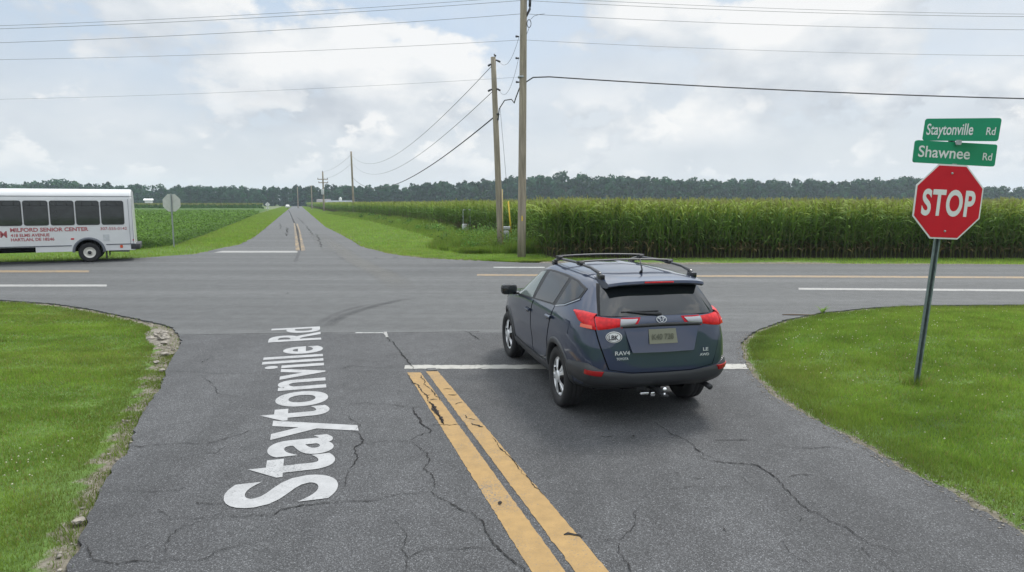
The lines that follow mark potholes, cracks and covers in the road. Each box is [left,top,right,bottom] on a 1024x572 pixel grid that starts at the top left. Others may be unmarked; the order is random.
crack [655,422,894,572]
